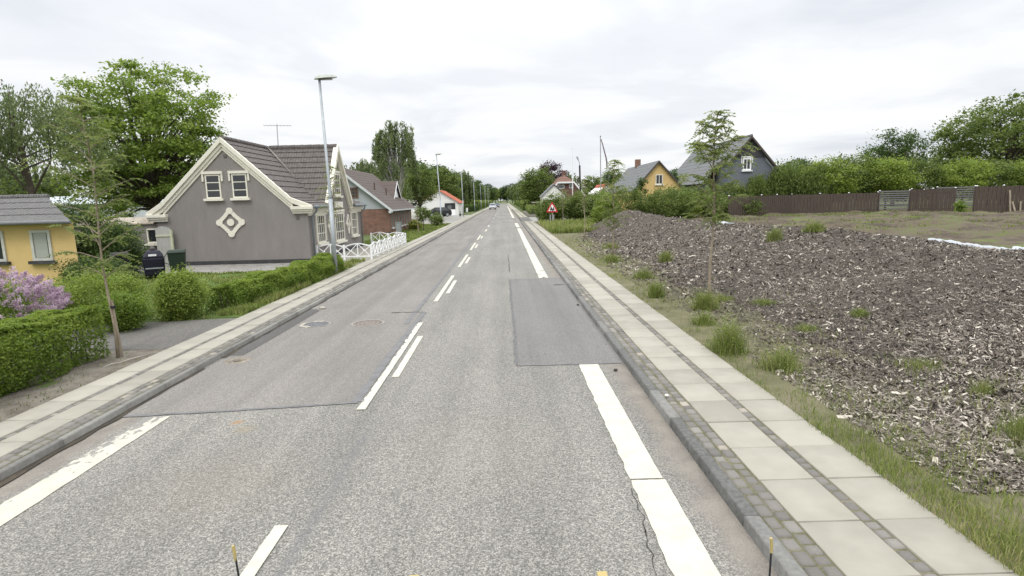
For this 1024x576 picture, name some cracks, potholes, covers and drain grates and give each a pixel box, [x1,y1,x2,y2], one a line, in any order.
crack [631,488,657,575]
